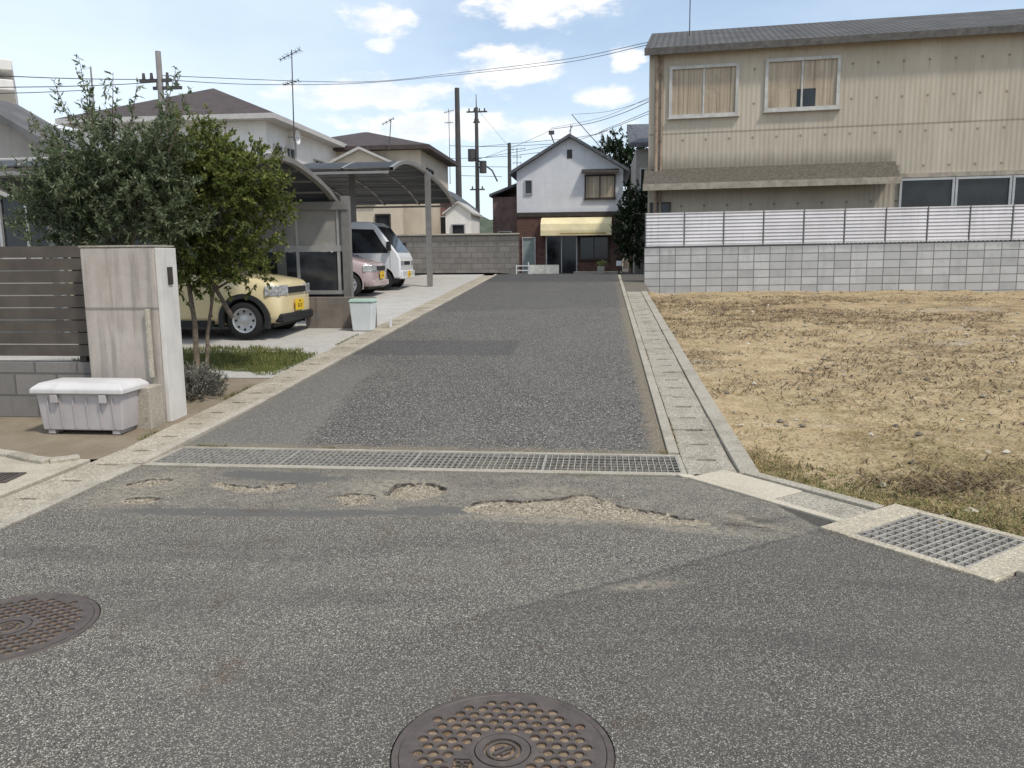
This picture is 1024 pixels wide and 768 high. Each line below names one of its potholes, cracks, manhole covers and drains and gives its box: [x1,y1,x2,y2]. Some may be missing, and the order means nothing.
manhole cover [0,593,101,663]
pothole [335,493,376,506]
pothole [380,483,447,501]
pothole [123,478,174,488]
drain grate [0,472,27,483]
drain grate [820,504,1024,584]
pothole [461,494,712,526]
manhole cover [390,692,615,768]
pothole [211,482,299,493]
